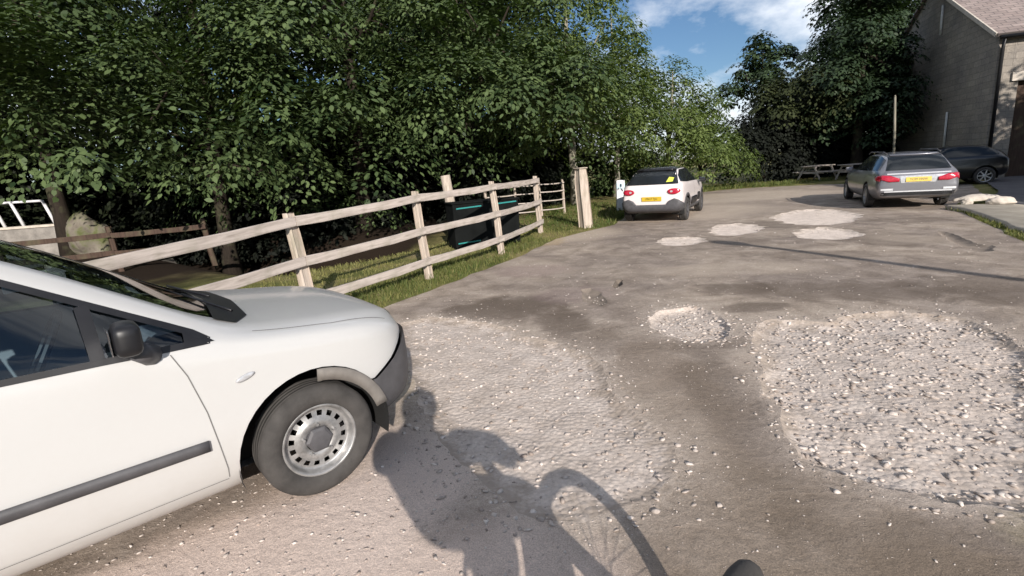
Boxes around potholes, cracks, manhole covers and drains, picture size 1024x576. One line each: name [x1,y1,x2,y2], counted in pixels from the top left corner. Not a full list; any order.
pothole [648,305,731,342]
pothole [400,316,679,523]
pothole [752,310,1024,513]
